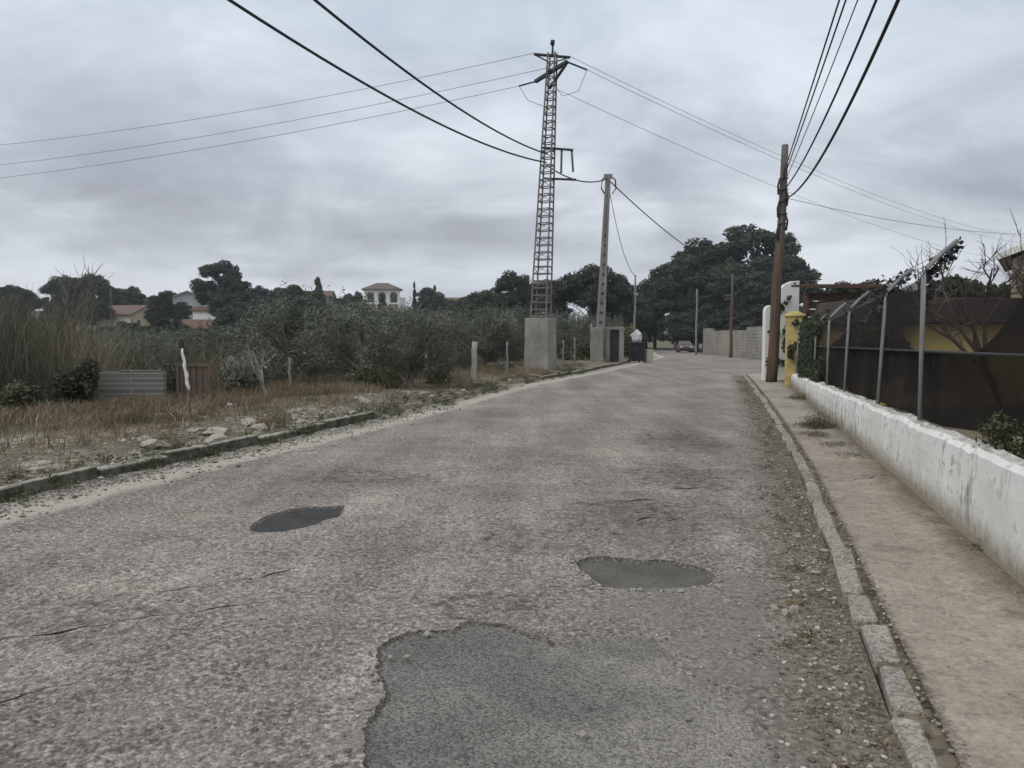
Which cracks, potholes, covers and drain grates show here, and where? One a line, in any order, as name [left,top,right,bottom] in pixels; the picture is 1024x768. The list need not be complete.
crack [0,602,258,640]
crack [149,562,319,595]
crack [614,499,699,523]
crack [0,680,80,703]
